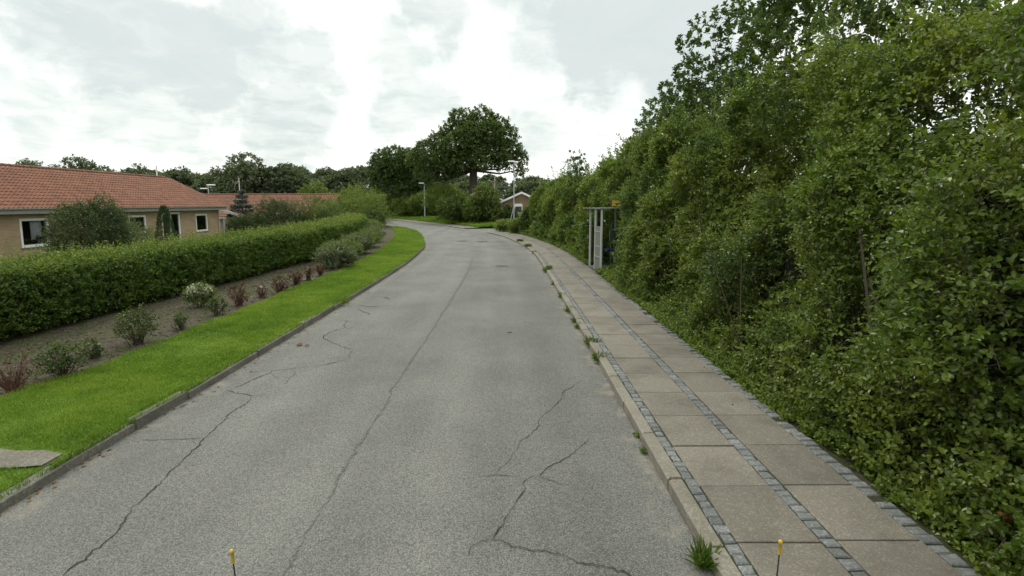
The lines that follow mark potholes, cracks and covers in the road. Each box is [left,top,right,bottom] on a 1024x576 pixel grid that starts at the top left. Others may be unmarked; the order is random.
crack [468,381,632,576]
crack [64,319,363,574]
